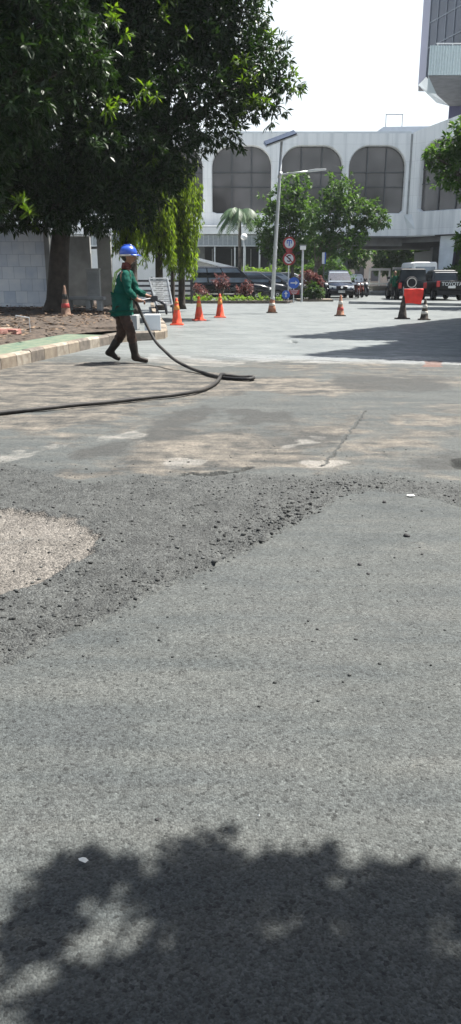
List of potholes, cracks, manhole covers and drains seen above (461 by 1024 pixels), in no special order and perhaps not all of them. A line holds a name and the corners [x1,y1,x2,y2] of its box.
crack [319,411,367,467]
